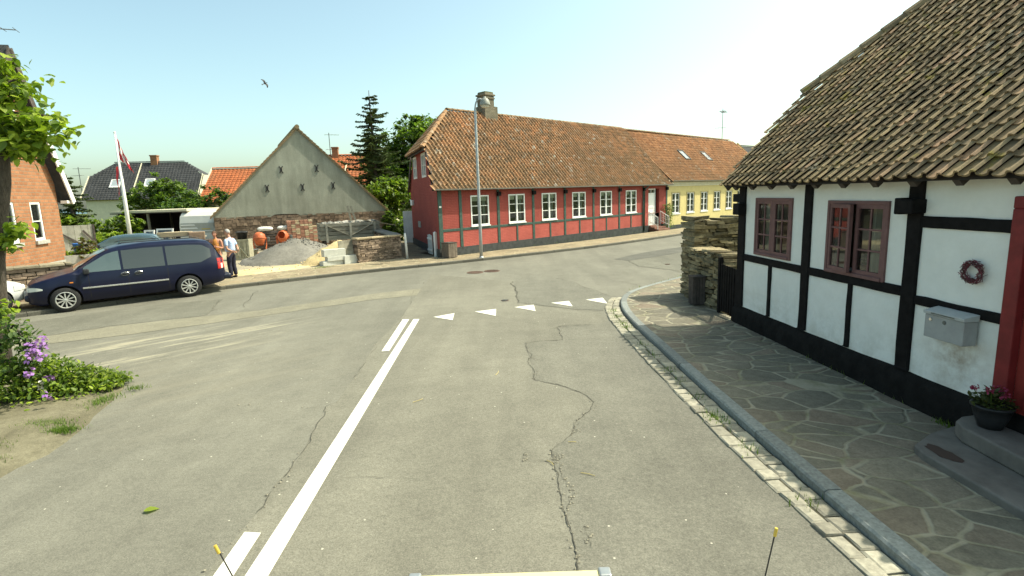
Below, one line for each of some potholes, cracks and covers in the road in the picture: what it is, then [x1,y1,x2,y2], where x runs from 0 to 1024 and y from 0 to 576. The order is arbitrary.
crack [522,324,597,571]
